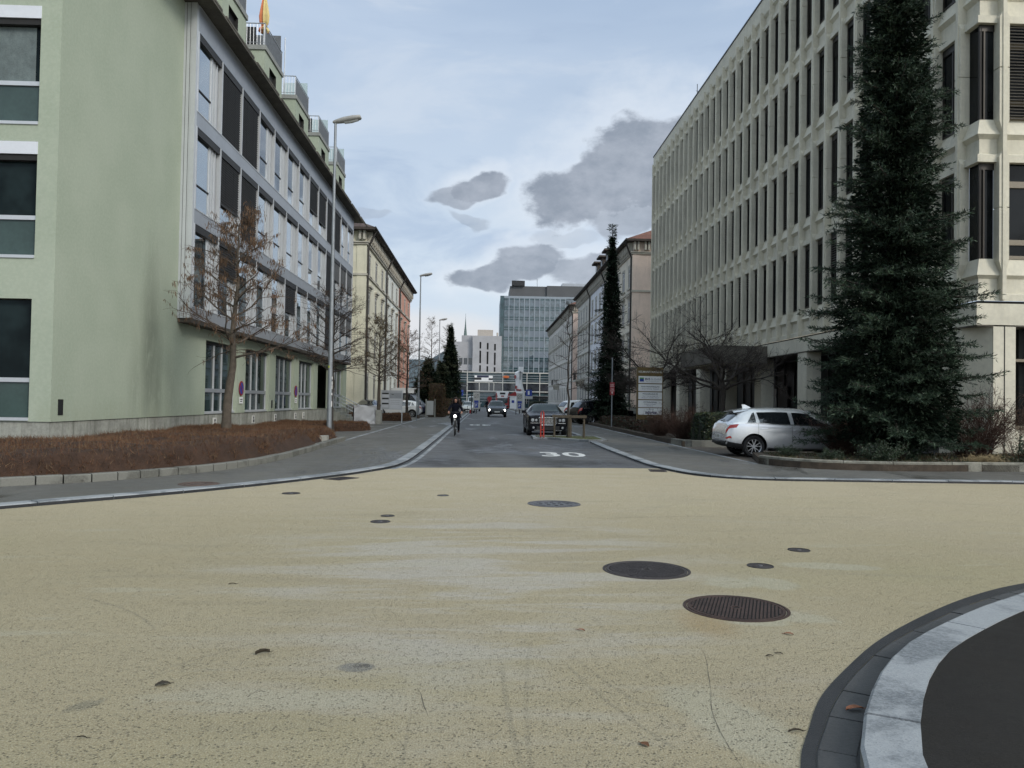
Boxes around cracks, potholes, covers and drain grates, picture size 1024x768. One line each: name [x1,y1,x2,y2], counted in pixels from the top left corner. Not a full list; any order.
manhole cover [603,561,691,580]
manhole cover [683,595,791,622]
